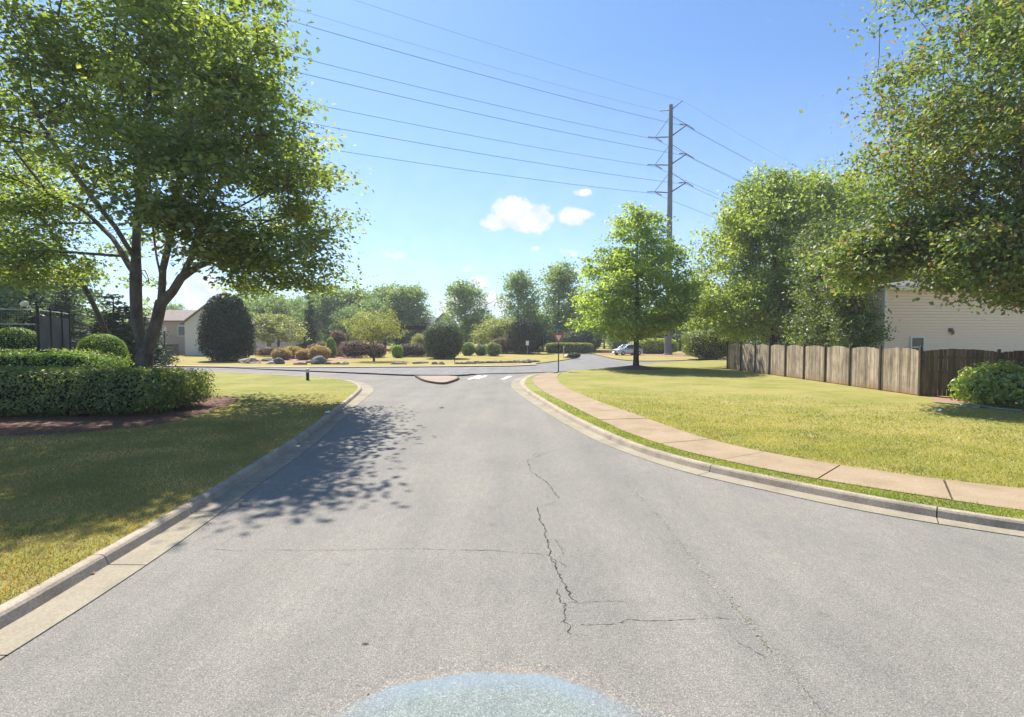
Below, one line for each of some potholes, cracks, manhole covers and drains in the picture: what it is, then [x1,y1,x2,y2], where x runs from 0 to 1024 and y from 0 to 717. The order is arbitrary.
crack [221,446,726,636]
